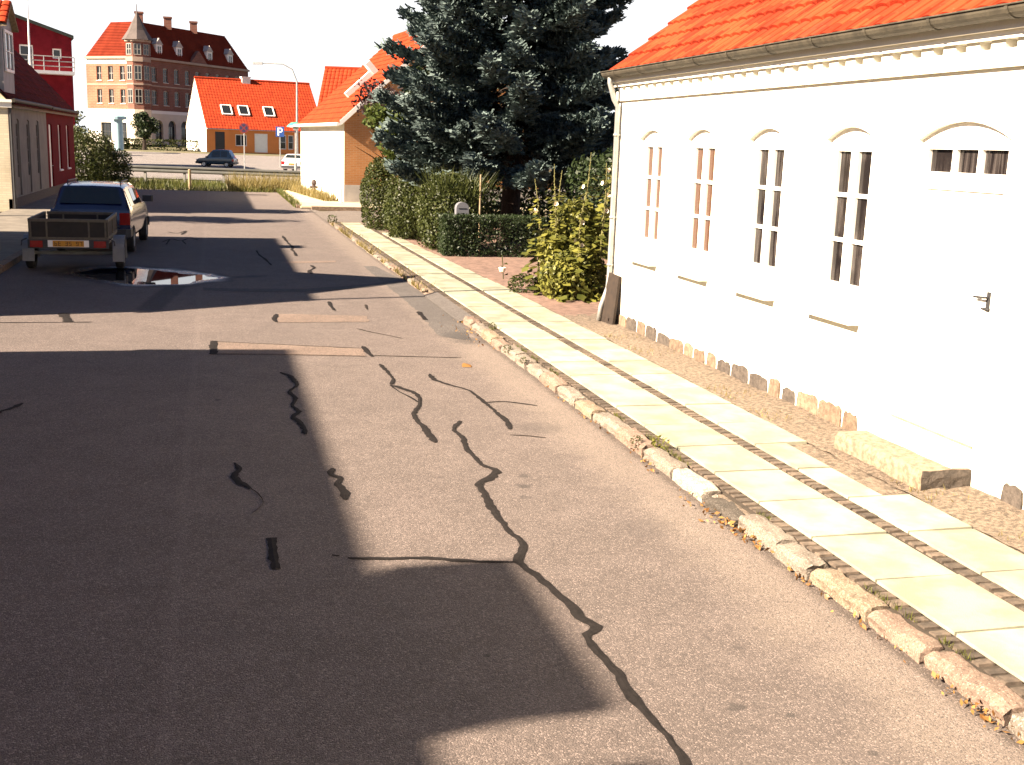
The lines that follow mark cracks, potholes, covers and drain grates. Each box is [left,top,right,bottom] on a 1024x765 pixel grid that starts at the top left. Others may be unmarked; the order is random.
crack [0,403,23,413]
crack [256,236,316,273]
